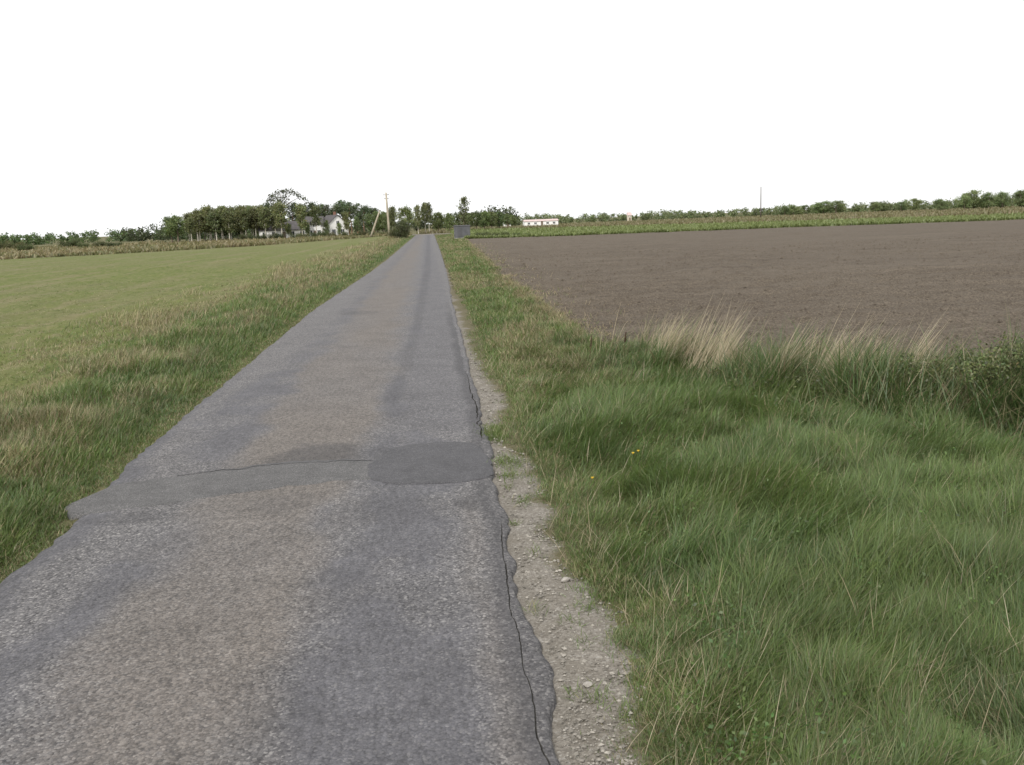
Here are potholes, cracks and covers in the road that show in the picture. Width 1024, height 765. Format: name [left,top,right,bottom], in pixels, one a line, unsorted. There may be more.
crack [467,375,482,438]
crack [501,524,551,765]
